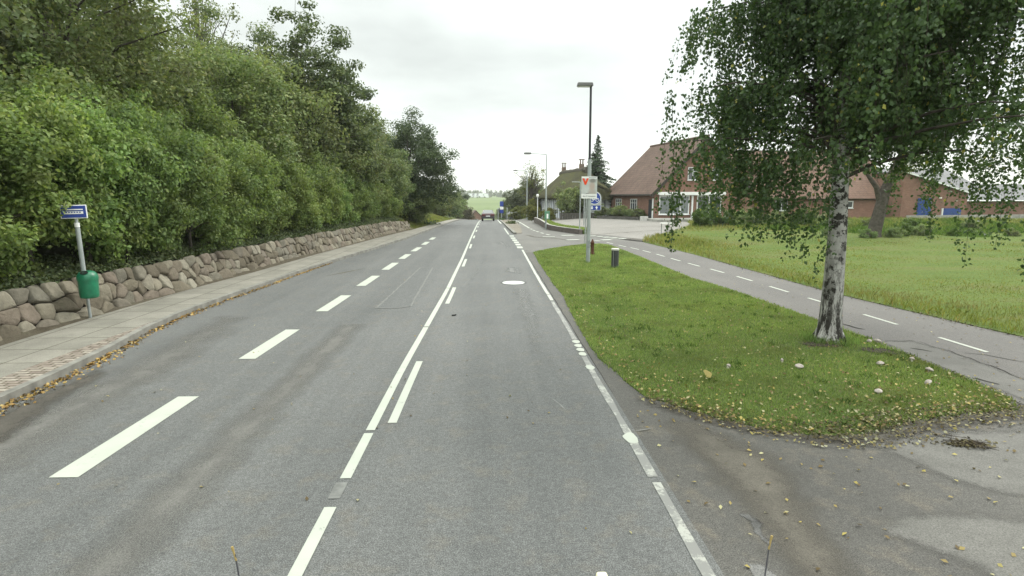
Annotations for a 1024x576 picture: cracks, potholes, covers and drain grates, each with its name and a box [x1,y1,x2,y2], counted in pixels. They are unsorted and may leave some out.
crack [911,340,1022,384]
